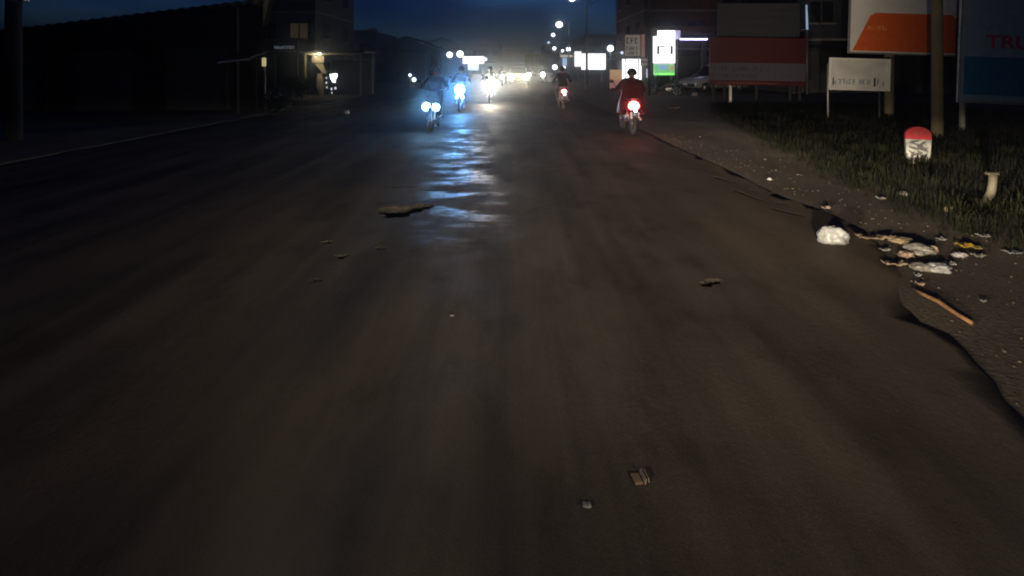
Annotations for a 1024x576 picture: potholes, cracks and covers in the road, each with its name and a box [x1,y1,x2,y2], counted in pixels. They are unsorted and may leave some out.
pothole [376,203,435,218]
pothole [699,278,724,287]
